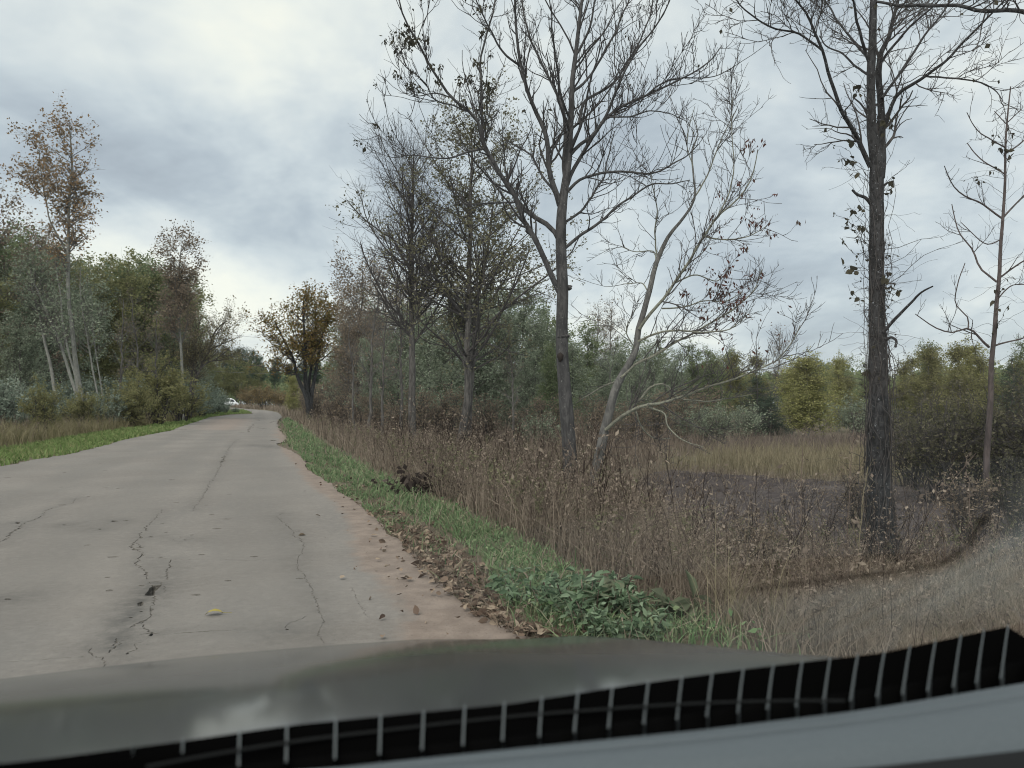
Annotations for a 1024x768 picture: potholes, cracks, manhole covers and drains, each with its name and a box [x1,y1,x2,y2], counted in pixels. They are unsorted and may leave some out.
crack [11,512,230,667]
crack [0,498,76,542]
crack [276,513,325,643]
